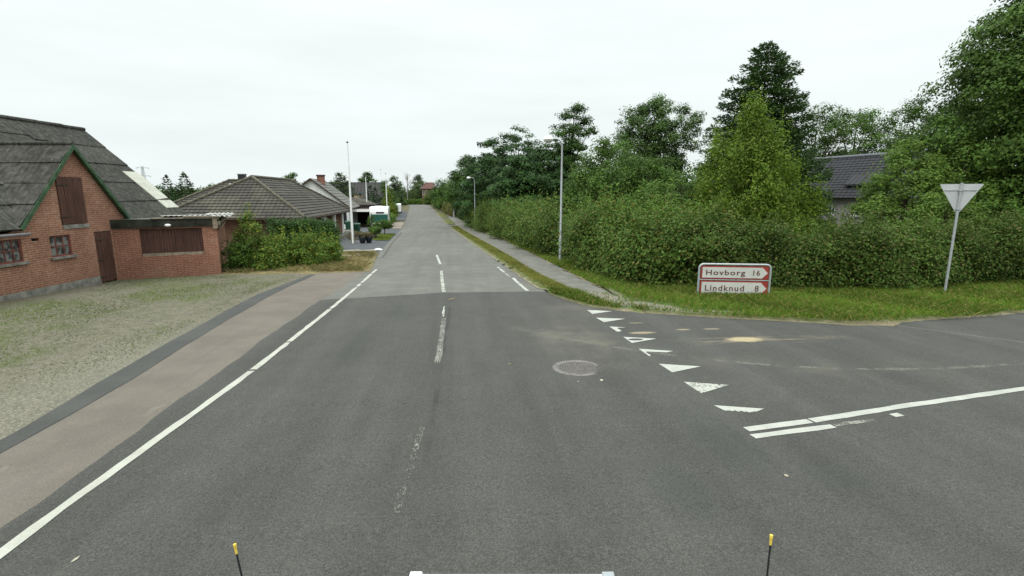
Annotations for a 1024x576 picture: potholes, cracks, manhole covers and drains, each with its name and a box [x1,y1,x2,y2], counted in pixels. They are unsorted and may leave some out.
manhole cover [553,360,602,376]
